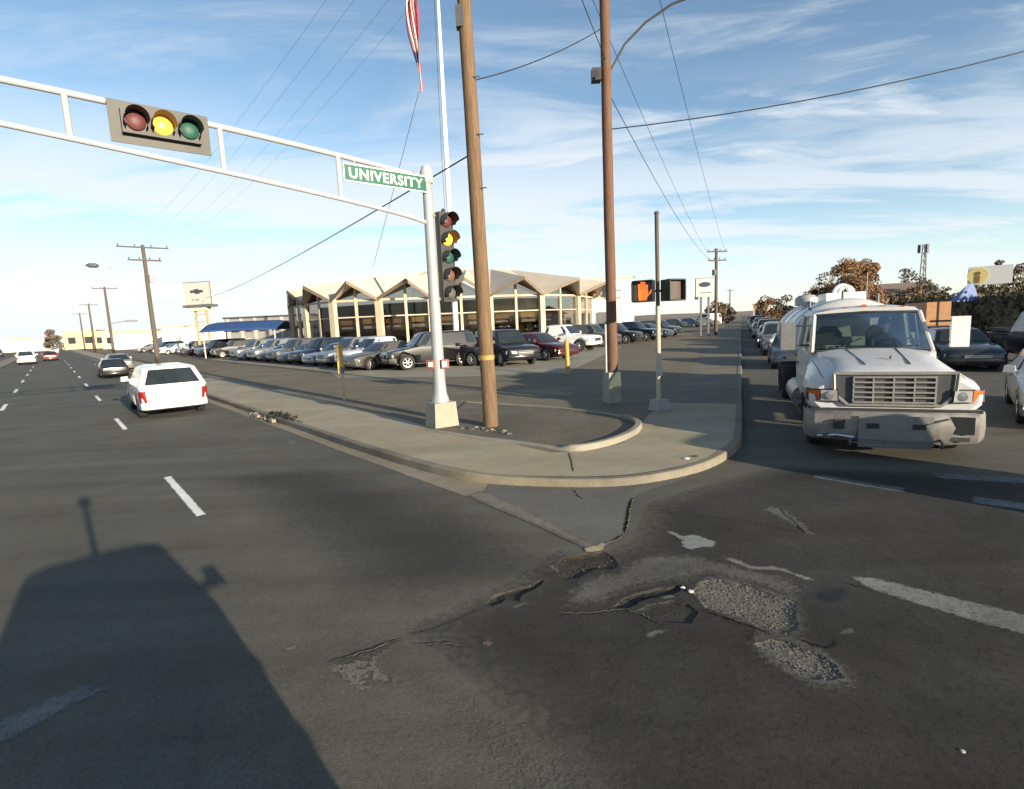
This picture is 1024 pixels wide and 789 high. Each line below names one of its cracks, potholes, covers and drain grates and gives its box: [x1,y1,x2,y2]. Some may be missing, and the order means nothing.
crack [606,498,633,543]
crack [555,608,664,625]
pothole [693,578,799,635]
pothole [635,601,699,624]
pothole [557,551,619,579]
pothole [754,639,844,681]
pothole [613,585,682,608]
